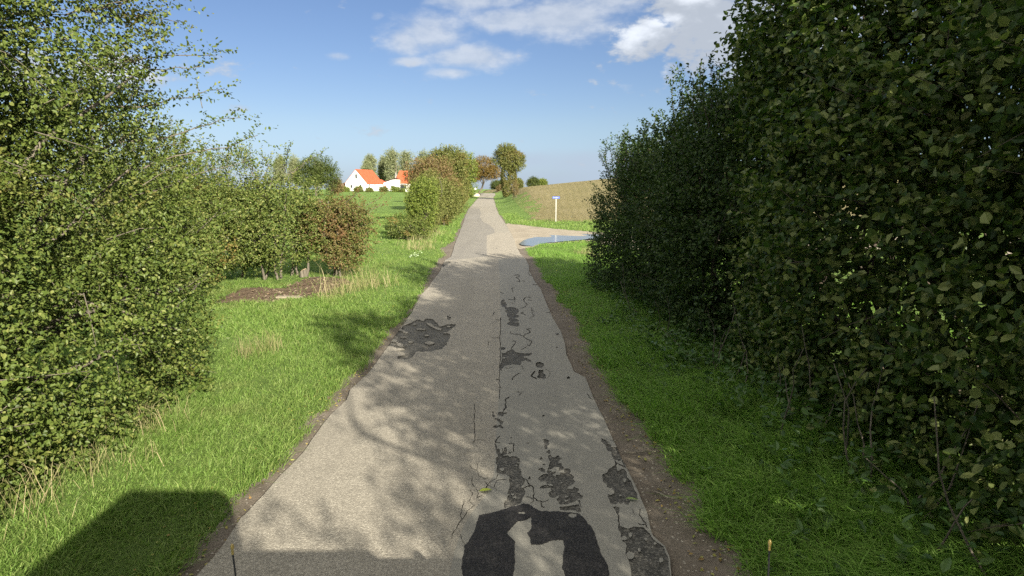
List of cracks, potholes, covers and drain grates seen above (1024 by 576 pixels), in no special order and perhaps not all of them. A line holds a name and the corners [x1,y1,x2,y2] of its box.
crack [523,476,549,508]
pothole [389,316,456,359]
pothole [601,438,622,461]
pothole [602,466,638,517]
pothole [499,347,532,371]
pothole [538,439,583,512]
crack [474,404,514,452]
crack [451,464,506,544]
pothole [495,444,525,508]
crack [488,274,549,412]
pothole [618,525,670,576]
pothole [501,299,519,327]
